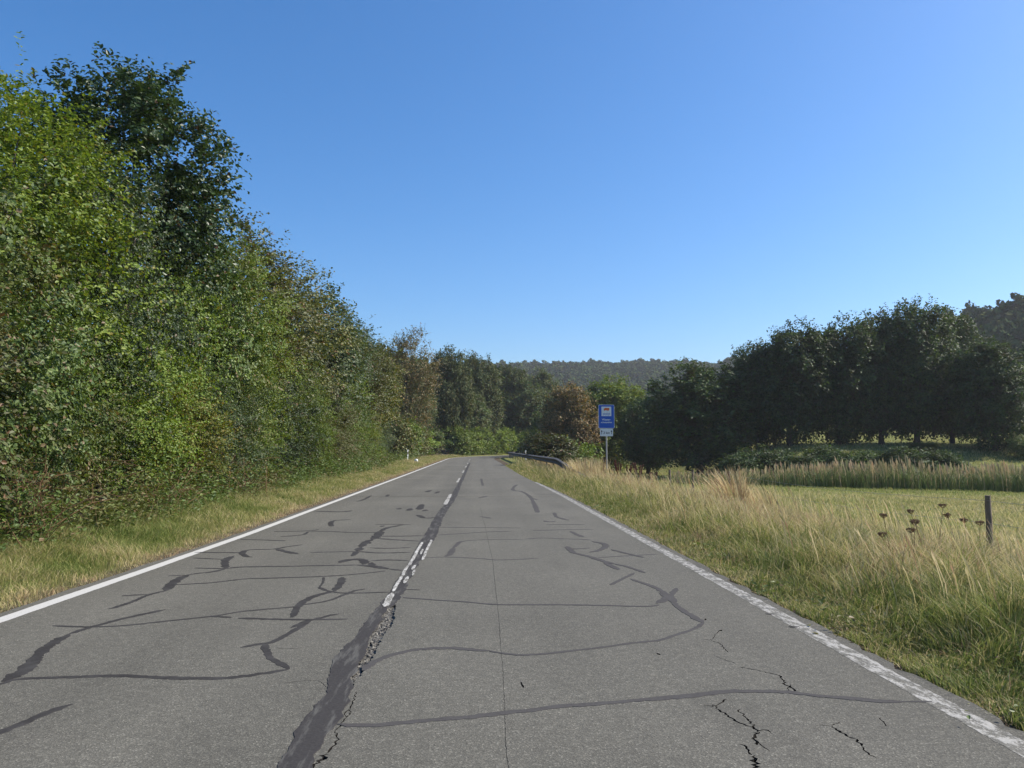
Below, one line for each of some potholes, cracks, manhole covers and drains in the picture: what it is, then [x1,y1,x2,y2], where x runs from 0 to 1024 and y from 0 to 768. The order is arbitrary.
crack [312,692,357,768]
crack [817,722,876,758]
crack [712,699,770,768]
crack [705,630,796,691]
